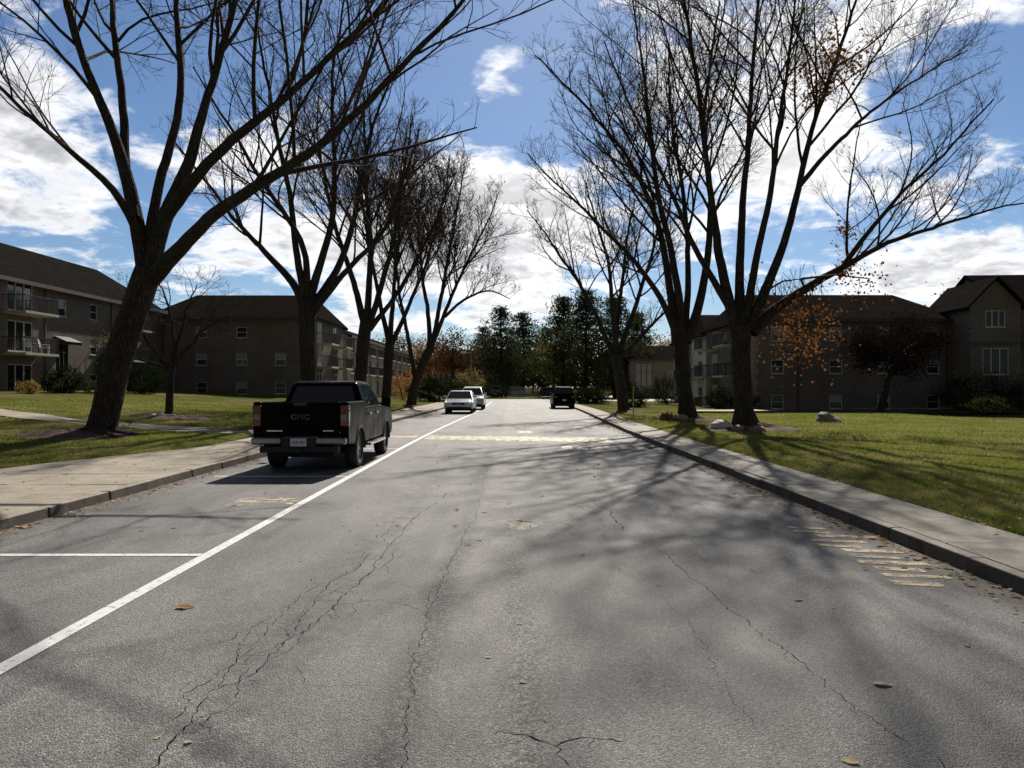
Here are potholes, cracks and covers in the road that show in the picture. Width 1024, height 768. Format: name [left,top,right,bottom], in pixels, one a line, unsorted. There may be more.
crack [153,494,446,768]
crack [613,565,753,720]
crack [659,550,945,768]
crack [493,721,626,768]
